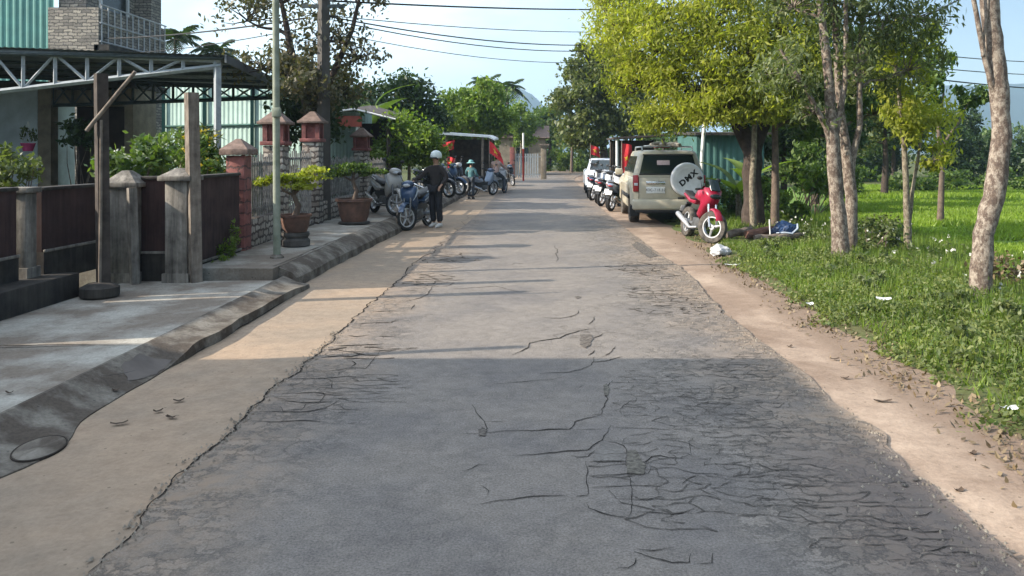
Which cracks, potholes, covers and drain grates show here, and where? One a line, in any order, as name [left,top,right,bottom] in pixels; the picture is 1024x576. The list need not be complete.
crack [606,263,715,314]
manhole cover [10,435,68,463]
crack [473,311,983,566]
